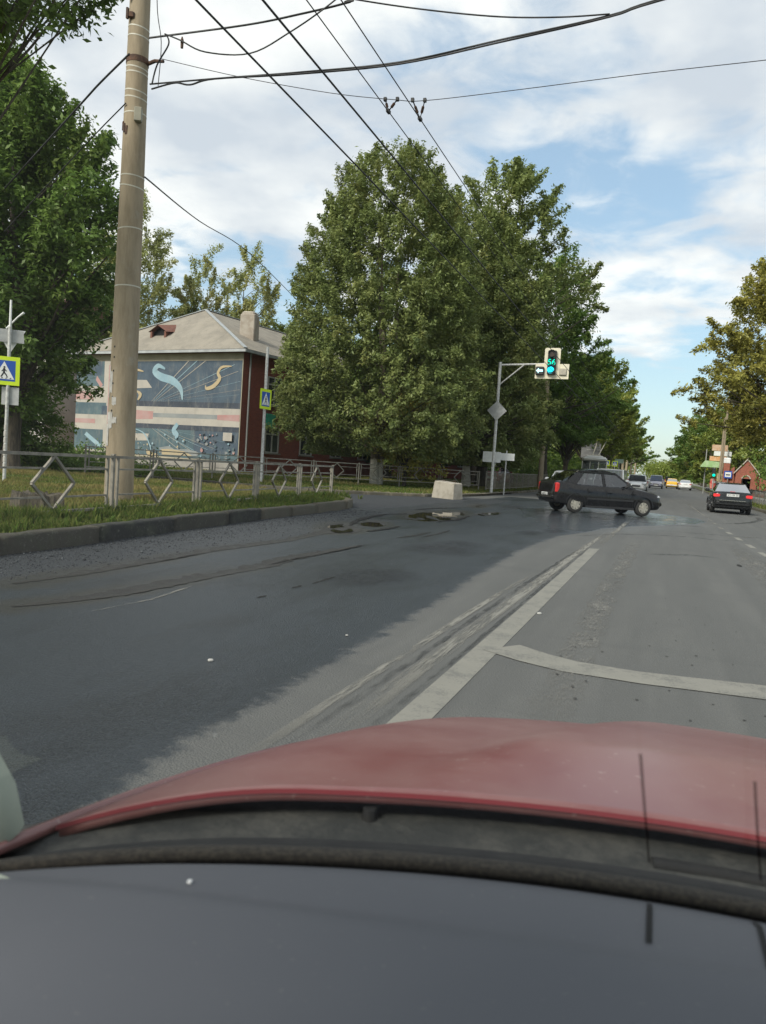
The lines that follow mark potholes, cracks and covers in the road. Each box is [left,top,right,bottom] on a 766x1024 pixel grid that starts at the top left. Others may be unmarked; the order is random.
pothole [322,523,363,534]
pothole [404,511,467,521]
